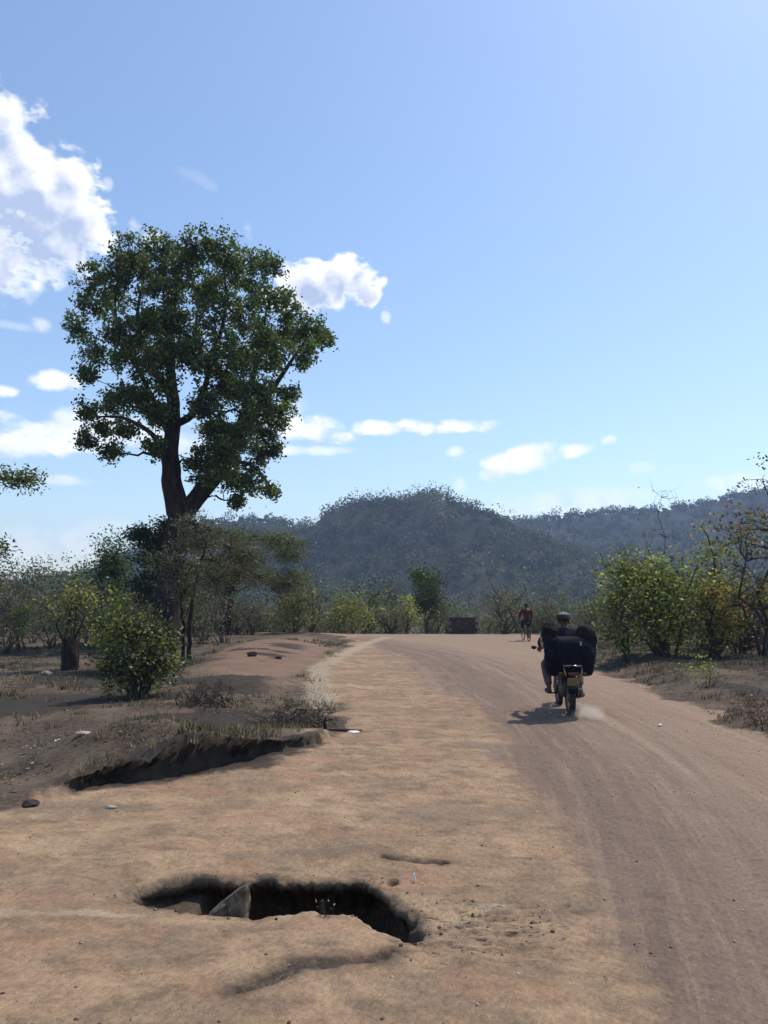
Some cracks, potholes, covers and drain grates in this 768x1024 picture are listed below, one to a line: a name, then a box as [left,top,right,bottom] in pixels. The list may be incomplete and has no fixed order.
pothole [112,873,437,945]
